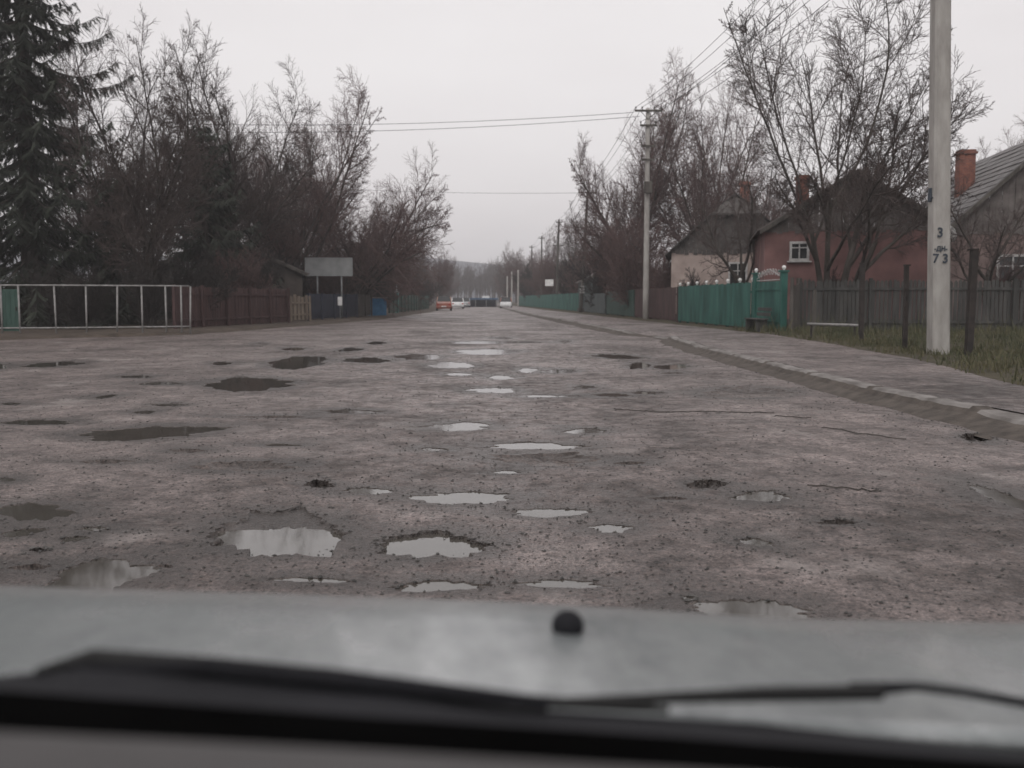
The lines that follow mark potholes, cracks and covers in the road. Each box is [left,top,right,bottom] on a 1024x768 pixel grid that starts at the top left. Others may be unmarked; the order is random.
pothole [685,479,728,489]
pothole [377,529,494,558]
crack [807,484,881,492]
pothole [510,508,595,518]
pothole [960,433,995,443]
pothole [203,375,296,392]
pothole [483,441,589,449]
pothole [266,356,328,370]
pothole [0,502,80,521]
crack [614,408,905,439]
pothole [72,425,233,441]
pothole [206,505,348,557]
